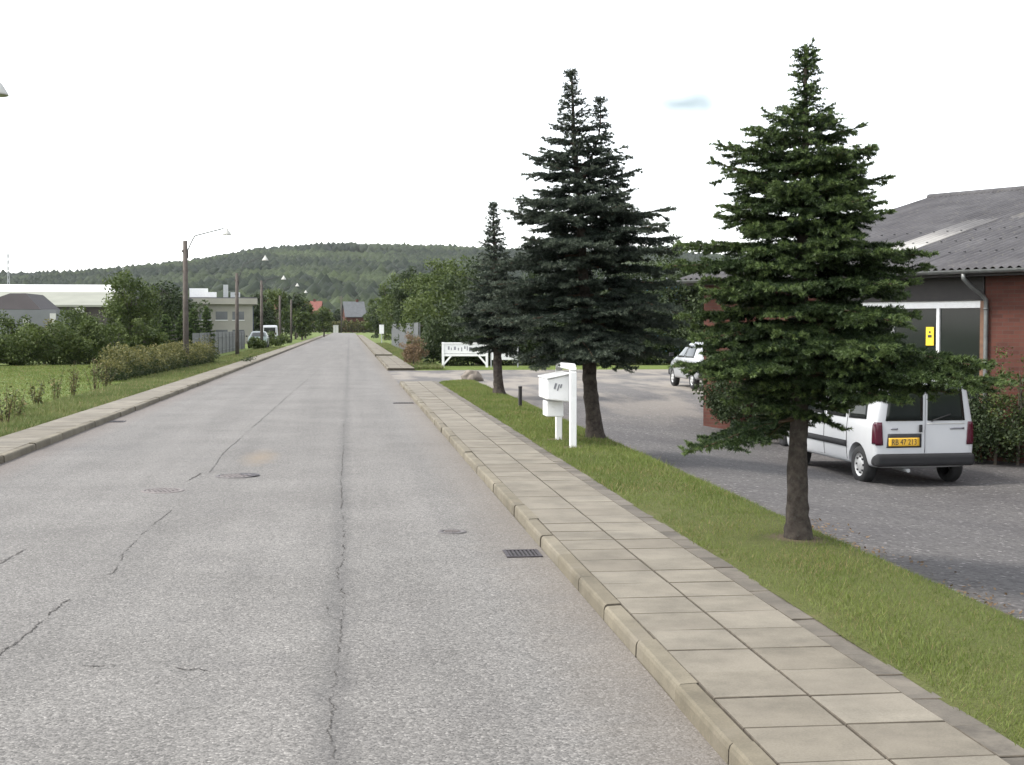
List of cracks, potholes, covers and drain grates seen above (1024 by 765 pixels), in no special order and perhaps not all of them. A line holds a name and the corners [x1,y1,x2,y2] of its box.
drain grate [502,549,543,558]
crack [0,509,172,655]
crack [323,426,346,761]
